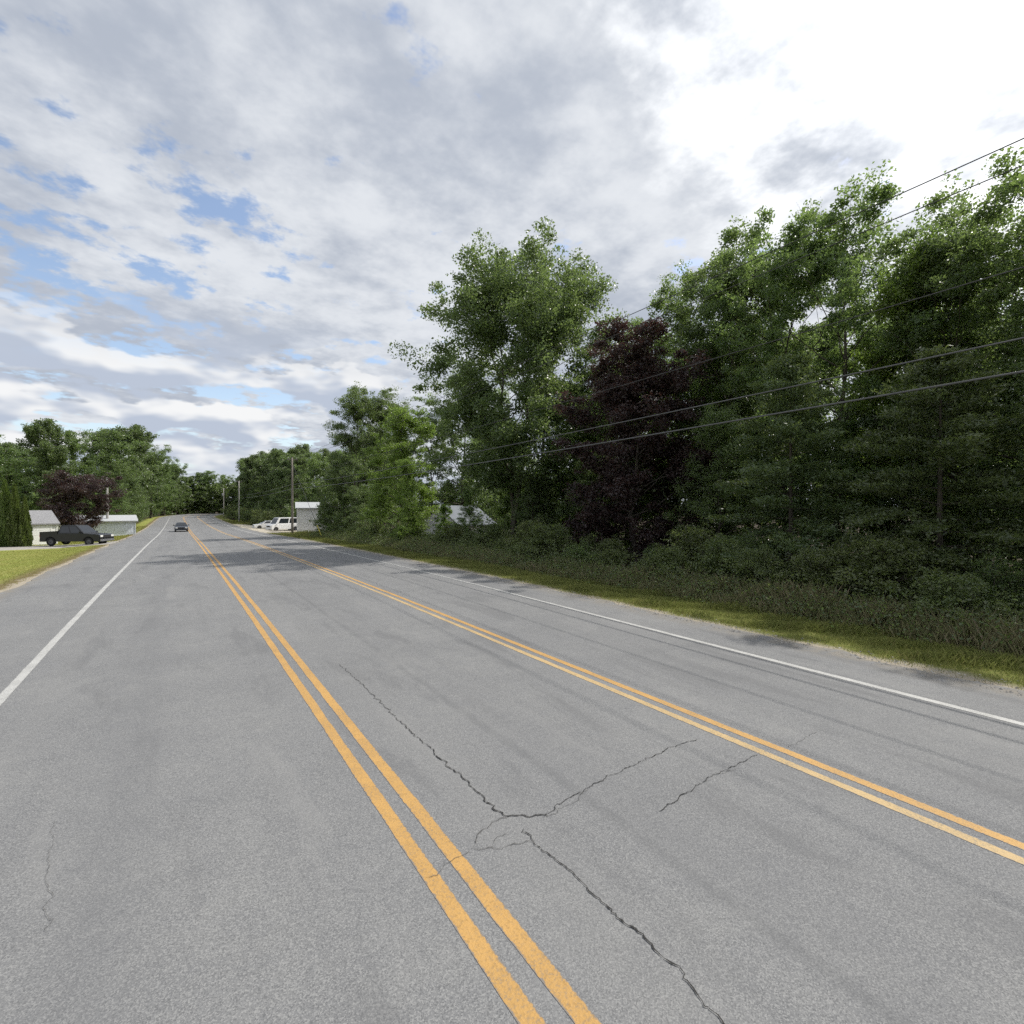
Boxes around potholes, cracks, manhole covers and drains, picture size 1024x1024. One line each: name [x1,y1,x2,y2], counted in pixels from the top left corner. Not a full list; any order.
crack [340,665,725,1024]
crack [660,755,755,811]
